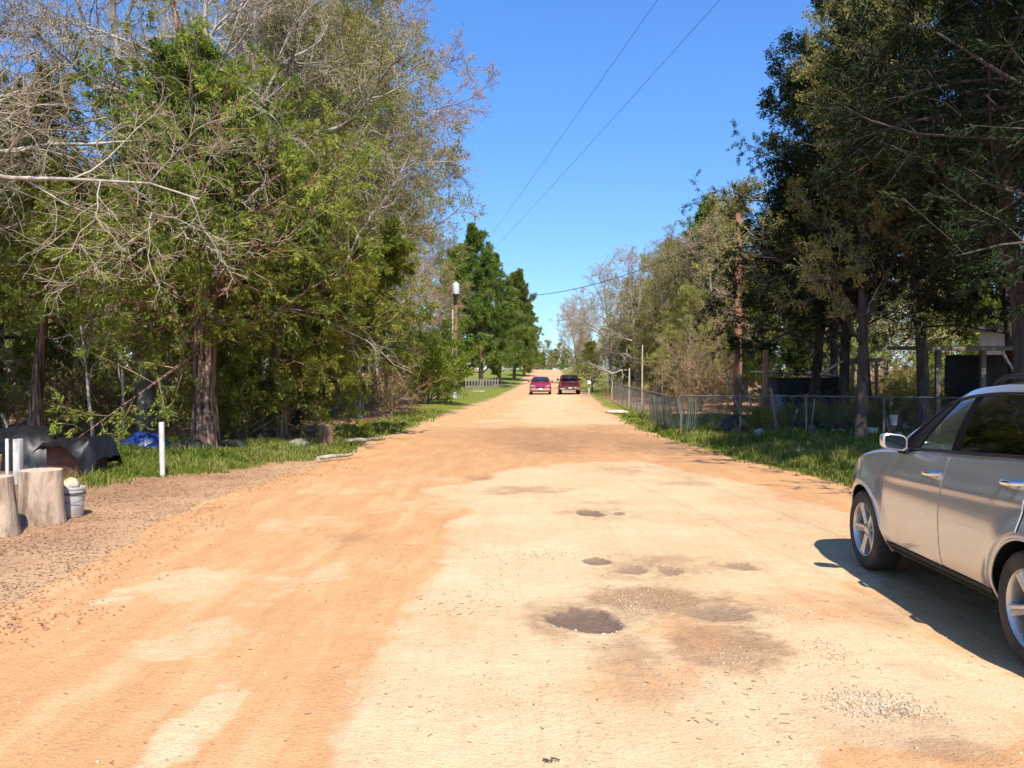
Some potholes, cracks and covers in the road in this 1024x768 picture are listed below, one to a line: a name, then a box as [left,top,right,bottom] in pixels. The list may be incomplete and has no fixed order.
pothole [606,562,657,579]
pothole [571,508,611,519]
pothole [533,603,637,638]
pothole [576,555,620,568]
pothole [649,562,692,579]
